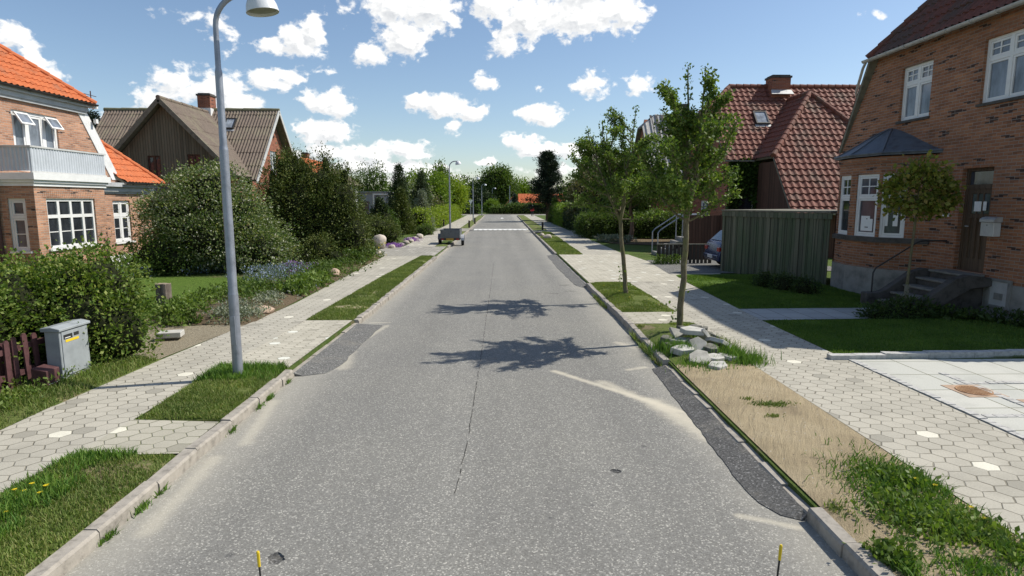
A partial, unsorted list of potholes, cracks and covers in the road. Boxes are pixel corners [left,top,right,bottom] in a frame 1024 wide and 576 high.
pothole [268,552,285,564]
manhole cover [941,385,1009,397]
